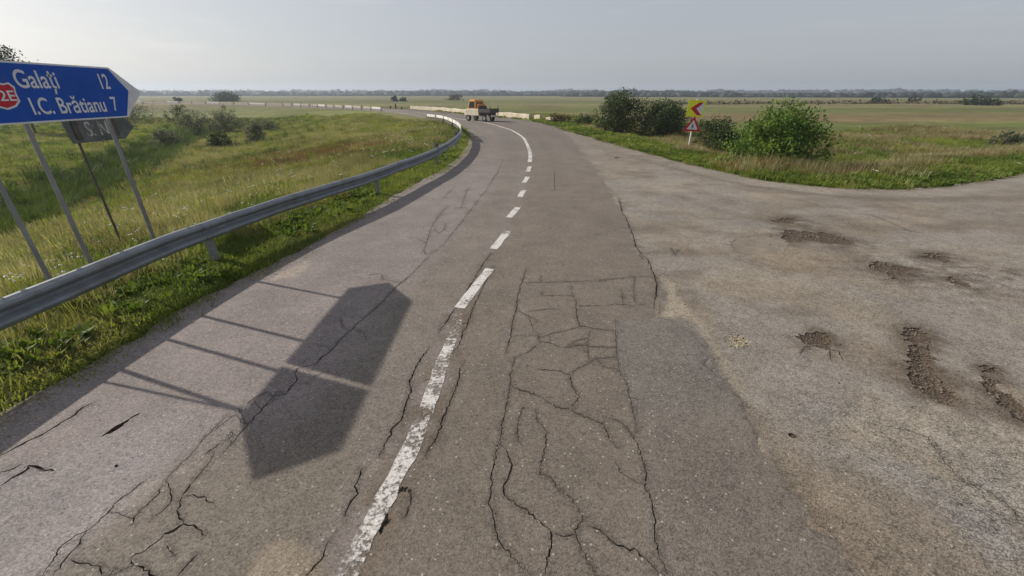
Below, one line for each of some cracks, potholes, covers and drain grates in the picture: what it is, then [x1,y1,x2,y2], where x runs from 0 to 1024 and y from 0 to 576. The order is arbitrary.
pothole [900,327,959,407]
pothole [919,253,951,263]
pothole [868,260,912,280]
crack [0,403,91,486]
pothole [781,230,855,246]
crack [43,158,504,576]
crack [487,271,667,575]
pothole [795,331,833,351]
pothole [978,365,1024,423]
